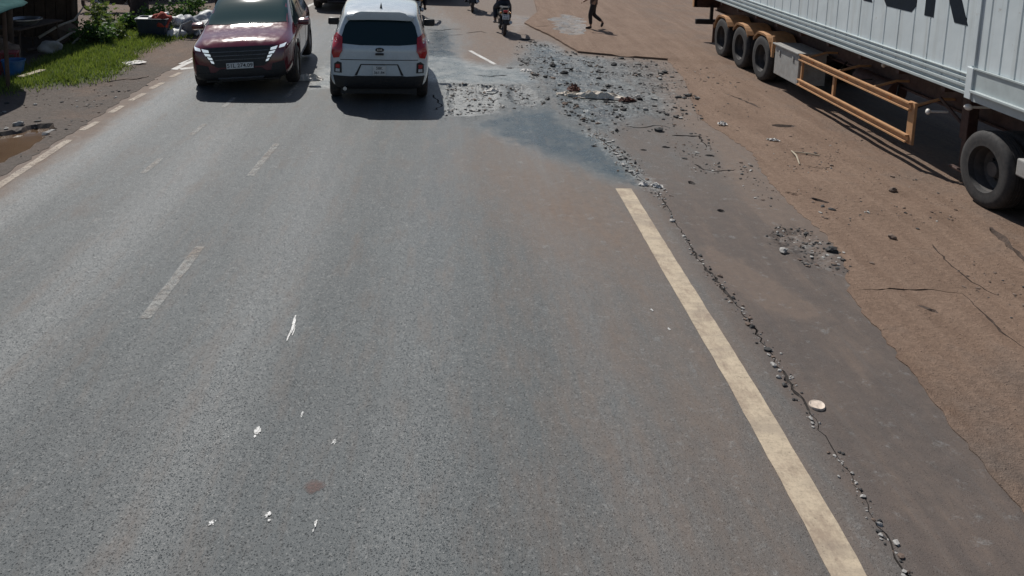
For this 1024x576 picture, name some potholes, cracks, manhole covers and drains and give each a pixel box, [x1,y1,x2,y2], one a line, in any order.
pothole [506,84,543,106]
crack [600,125,908,576]
pothole [768,227,834,270]
pothole [446,84,499,116]
pothole [524,42,679,131]
